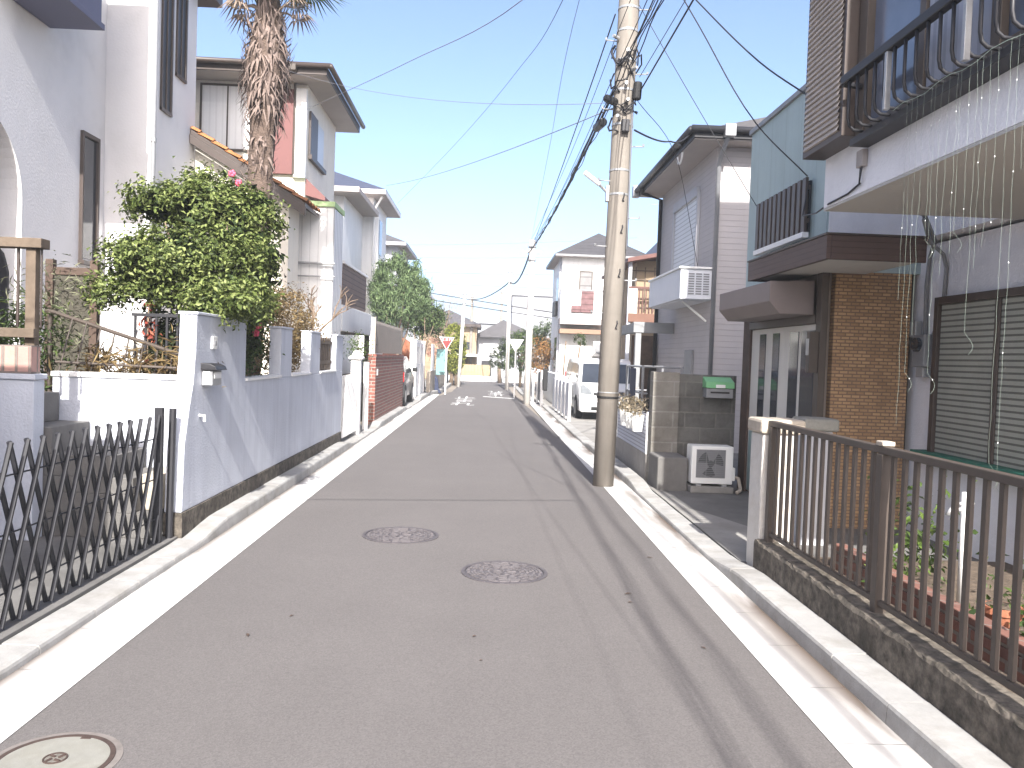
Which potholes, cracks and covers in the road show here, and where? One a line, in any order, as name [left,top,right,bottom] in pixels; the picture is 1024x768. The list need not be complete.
manhole cover [461,561,548,584]
manhole cover [362,527,439,544]
manhole cover [0,732,124,768]
